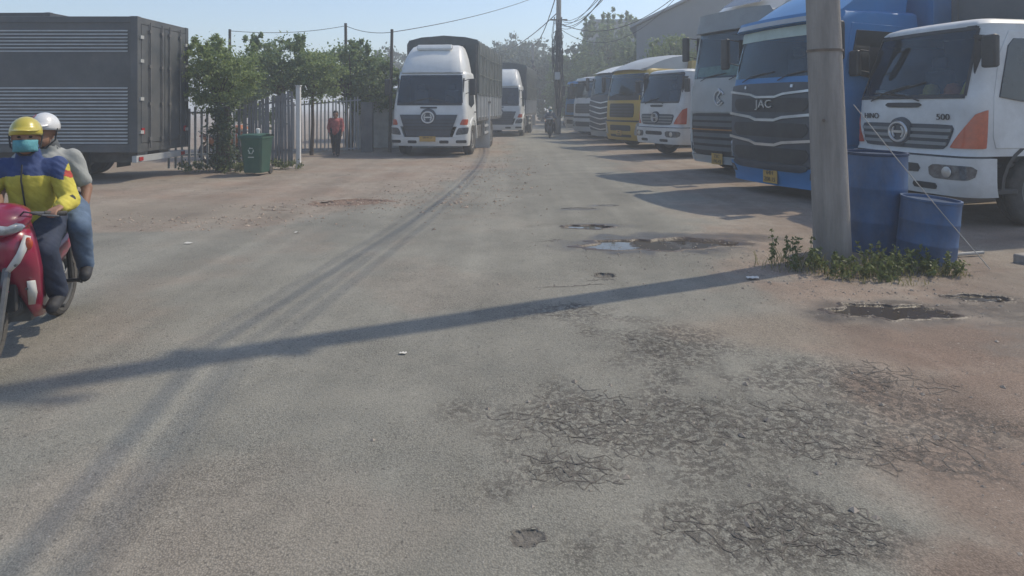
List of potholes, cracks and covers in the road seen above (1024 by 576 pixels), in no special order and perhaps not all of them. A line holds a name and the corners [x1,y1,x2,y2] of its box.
crack [653,497,895,565]
crack [821,359,961,399]
crack [617,330,687,361]
pothole [307,198,397,206]
crack [750,390,986,476]
pothole [507,526,548,549]
pothole [567,236,755,252]
pothole [938,293,1017,303]
pothole [817,302,971,322]
